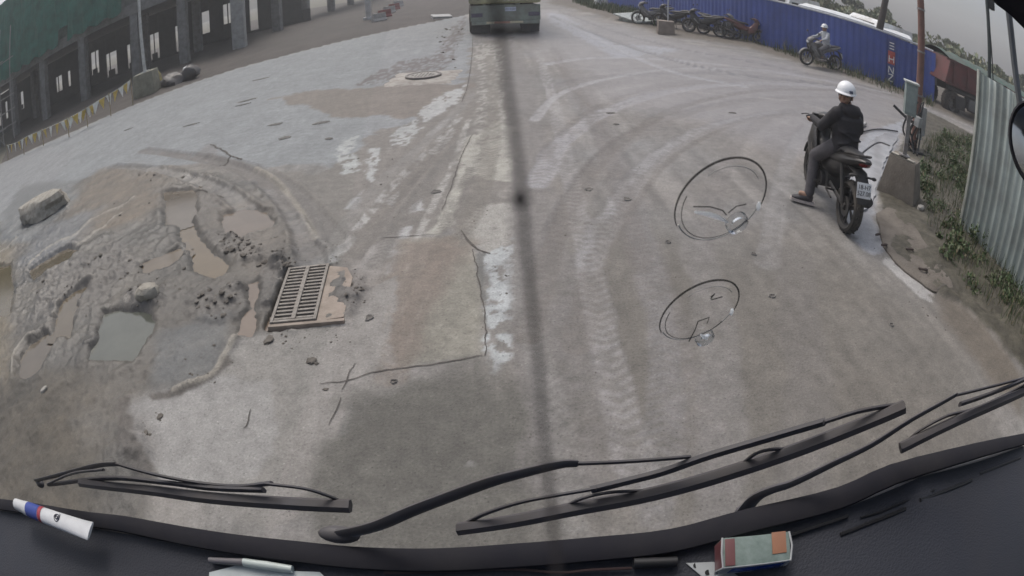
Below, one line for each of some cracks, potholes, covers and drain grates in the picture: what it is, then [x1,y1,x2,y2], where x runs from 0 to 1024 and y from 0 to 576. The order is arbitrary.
pothole [89,311,156,361]
drain grate [268,263,353,332]
crack [320,230,489,423]
pothole [19,335,53,379]
pothole [164,186,203,231]
pothole [237,282,271,337]
pothole [30,249,77,280]
crack [210,144,242,166]
pothole [180,226,229,278]
pothole [222,206,275,237]
